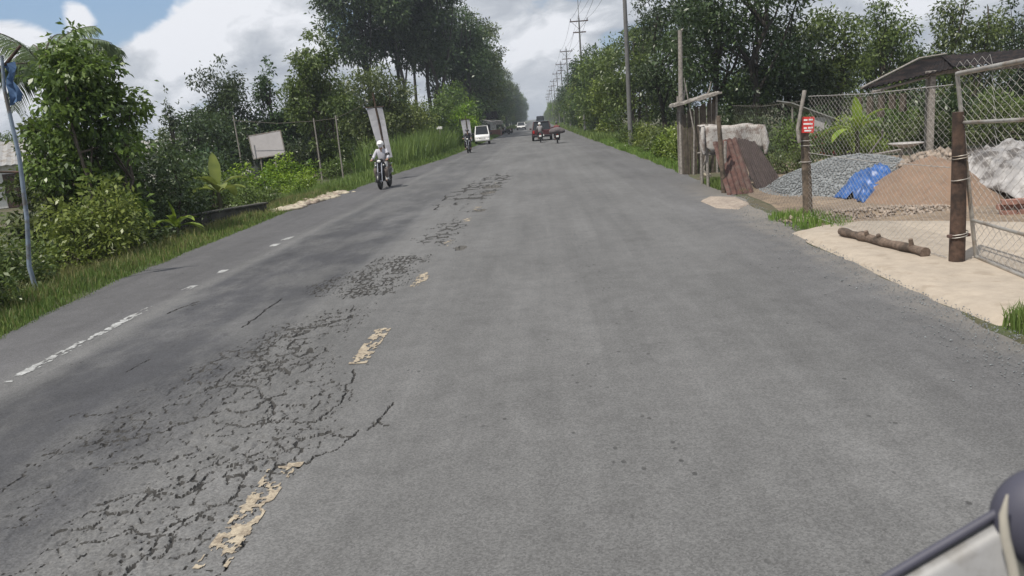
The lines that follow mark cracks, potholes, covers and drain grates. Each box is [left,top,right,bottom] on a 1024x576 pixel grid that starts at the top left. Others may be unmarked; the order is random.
crack [2,174,511,576]
